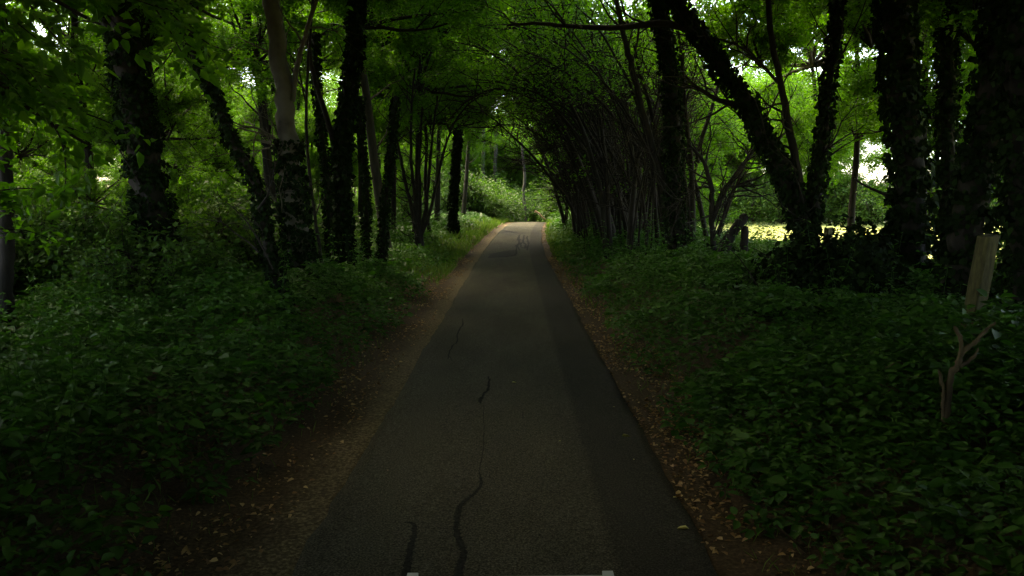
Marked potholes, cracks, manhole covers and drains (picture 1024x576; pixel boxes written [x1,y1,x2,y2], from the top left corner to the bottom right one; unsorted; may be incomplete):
crack [448,318,464,362]
crack [478,376,491,404]
